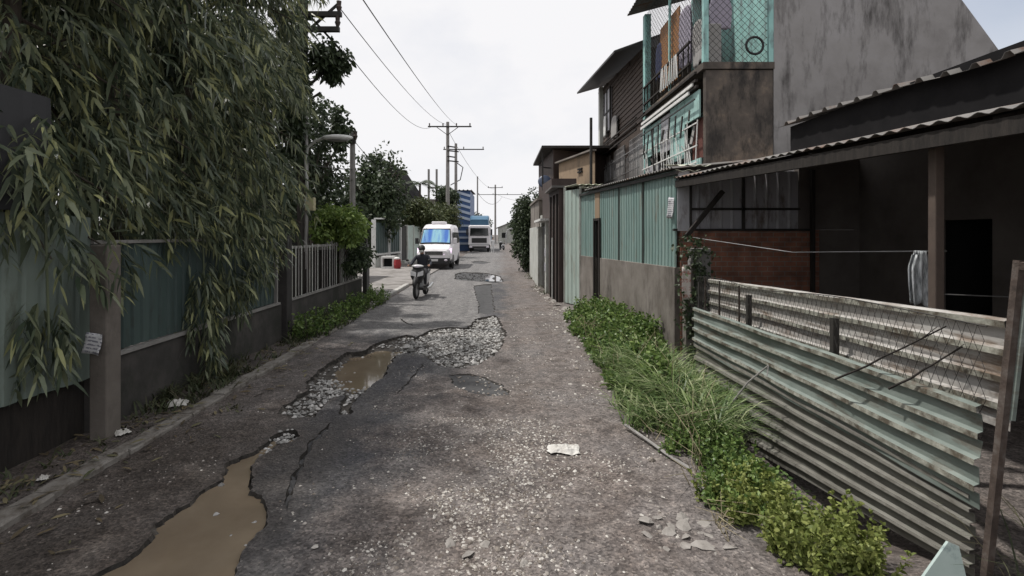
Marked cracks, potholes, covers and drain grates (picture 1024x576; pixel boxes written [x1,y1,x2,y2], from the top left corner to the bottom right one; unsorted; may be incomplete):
pothole [93,429,300,576]
crack [284,422,331,510]
crack [397,363,424,394]
pothole [277,315,507,419]
pothole [454,272,504,282]
